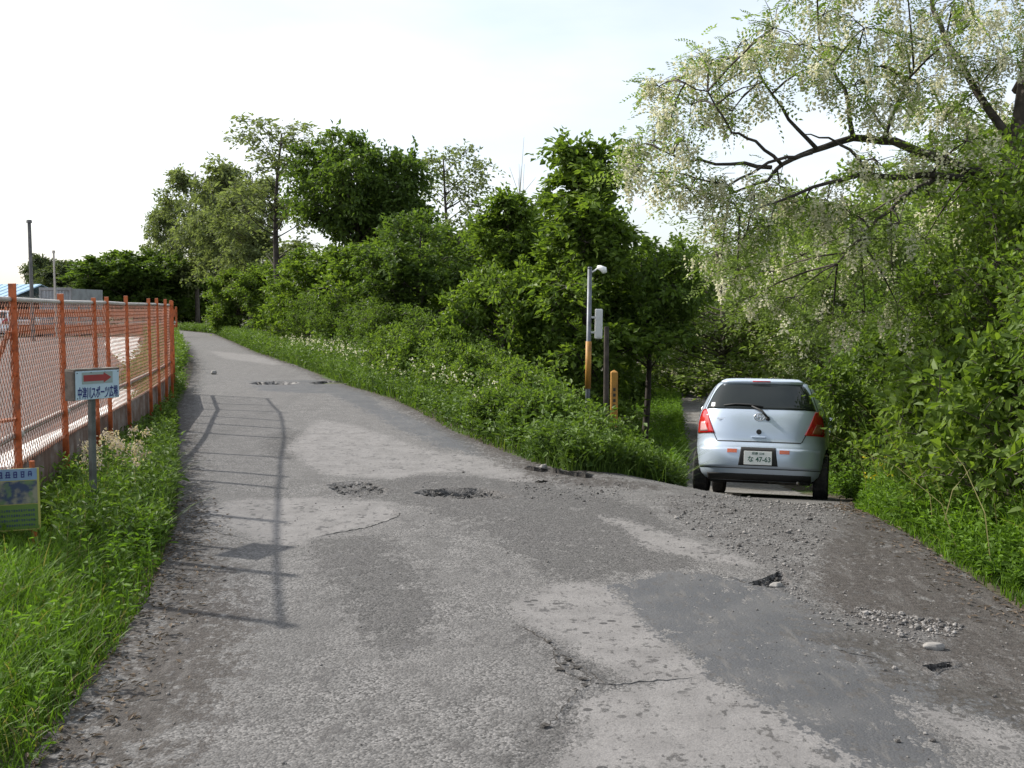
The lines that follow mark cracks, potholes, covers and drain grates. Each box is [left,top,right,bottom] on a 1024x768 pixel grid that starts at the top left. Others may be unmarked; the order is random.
pothole [408,487,523,501]
crack [509,625,706,729]
pothole [916,661,963,676]
crack [310,507,405,539]
pothole [741,570,800,592]
pothole [321,481,394,499]
